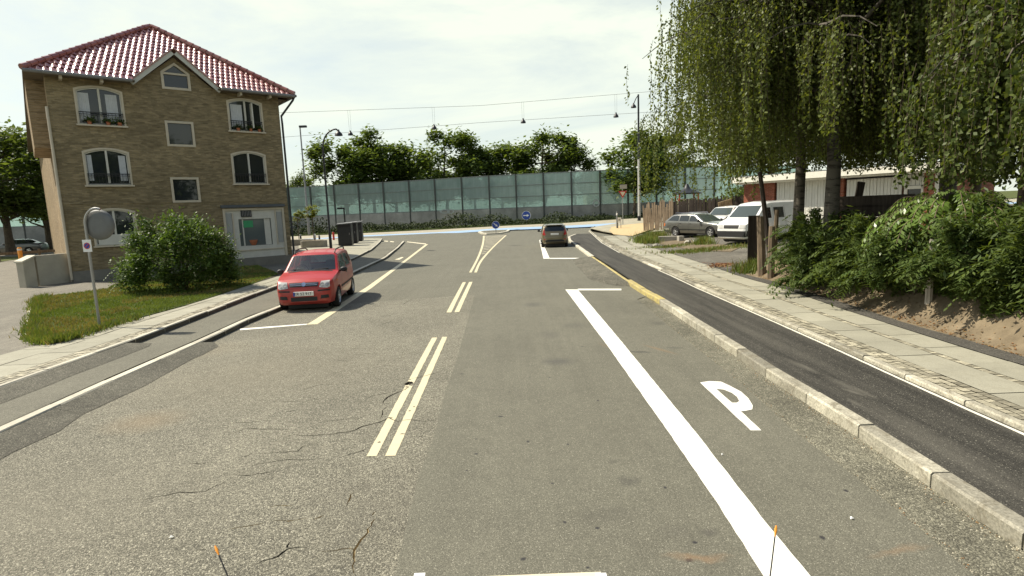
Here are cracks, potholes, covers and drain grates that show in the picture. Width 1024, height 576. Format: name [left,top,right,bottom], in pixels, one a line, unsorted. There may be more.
crack [239,371,442,476]
crack [257,543,299,564]
crack [232,505,324,529]
crack [322,492,376,574]
